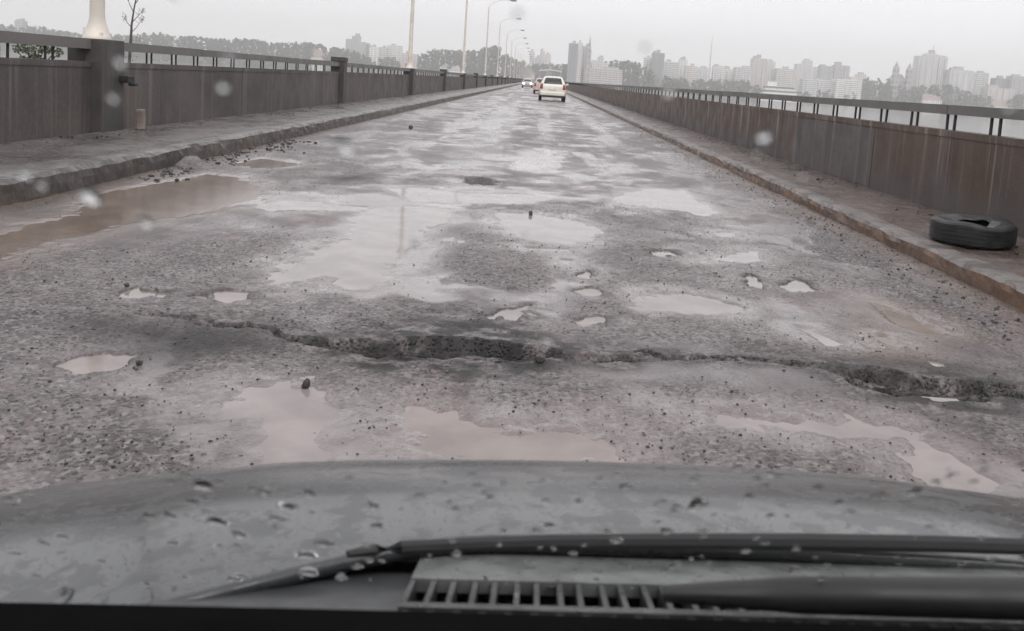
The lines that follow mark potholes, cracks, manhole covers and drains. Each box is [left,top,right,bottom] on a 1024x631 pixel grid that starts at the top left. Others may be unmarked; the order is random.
pothole [457,175,507,187]
pothole [176,285,264,306]
pothole [40,347,158,381]
pothole [471,301,547,329]
pothole [769,276,825,293]
pothole [633,247,706,260]
pothole [567,285,613,299]
pothole [564,312,617,328]
pothole [104,283,185,301]
pothole [740,272,771,290]
